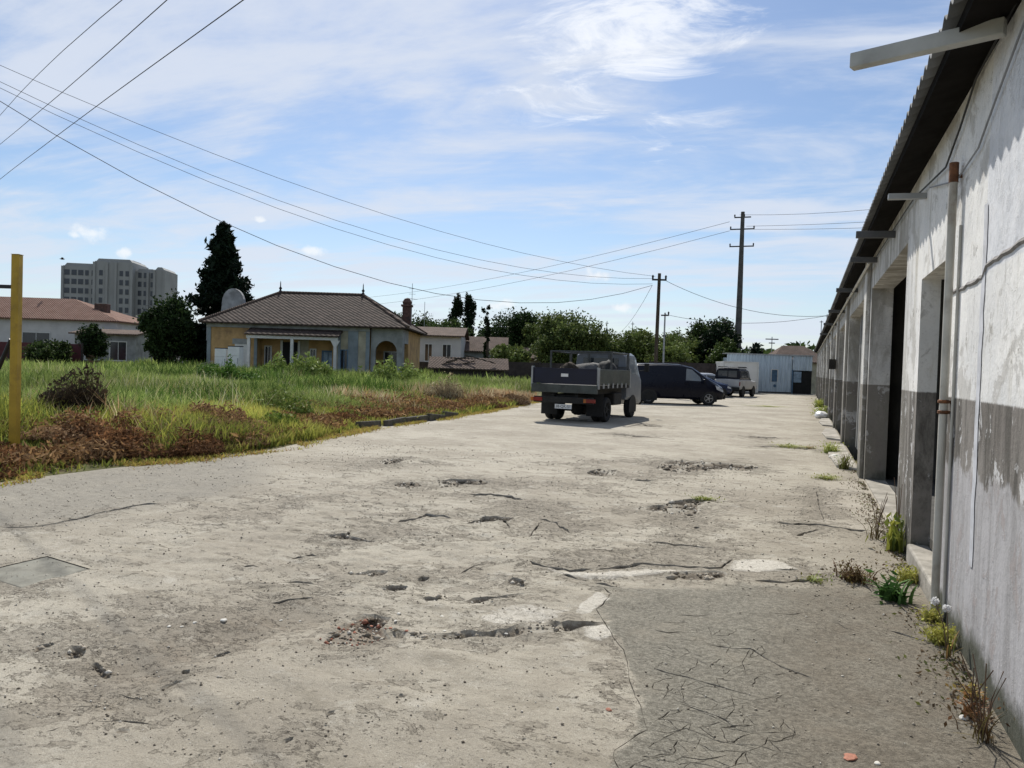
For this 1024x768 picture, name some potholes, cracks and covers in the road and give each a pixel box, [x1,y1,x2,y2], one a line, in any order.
pothole [628,499,710,516]
pothole [387,620,609,640]
manhole cover [0,556,89,588]
pothole [436,479,491,487]
pothole [657,459,758,473]
crack [530,541,812,768]
pothole [315,613,391,647]
crack [530,518,570,536]
crack [2,503,163,528]
